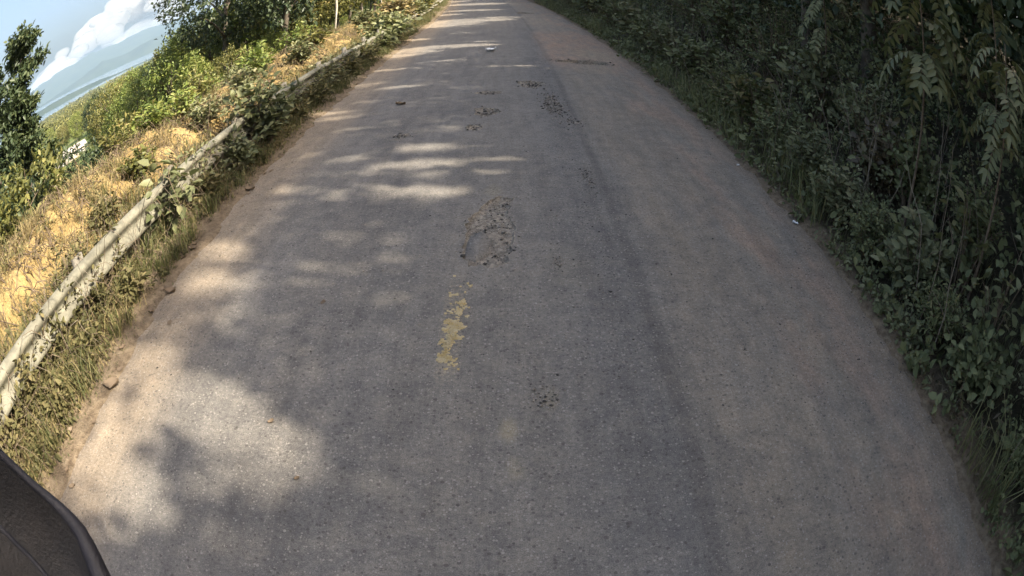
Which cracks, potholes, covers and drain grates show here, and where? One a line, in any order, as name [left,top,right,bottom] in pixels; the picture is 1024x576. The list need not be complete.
pothole [516,81,546,89]
pothole [474,106,501,118]
pothole [455,192,519,273]
